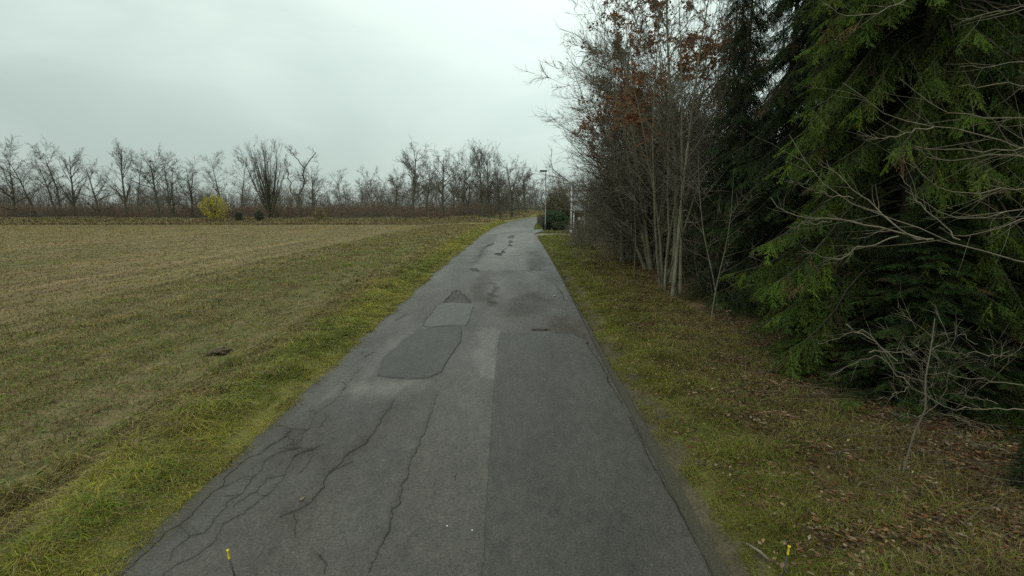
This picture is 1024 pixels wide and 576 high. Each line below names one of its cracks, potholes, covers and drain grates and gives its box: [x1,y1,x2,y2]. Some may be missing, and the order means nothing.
crack [121,368,362,575]
crack [369,395,437,571]
crack [280,401,393,533]
